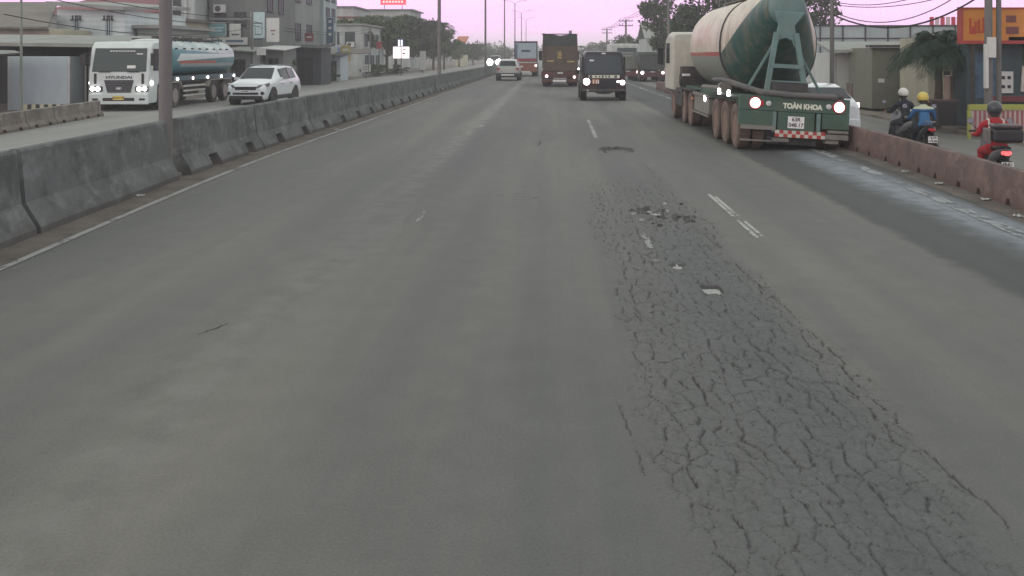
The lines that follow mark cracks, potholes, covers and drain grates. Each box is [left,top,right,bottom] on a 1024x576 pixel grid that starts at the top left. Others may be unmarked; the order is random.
crack [572,140,1024,576]
pothole [628,204,707,225]
